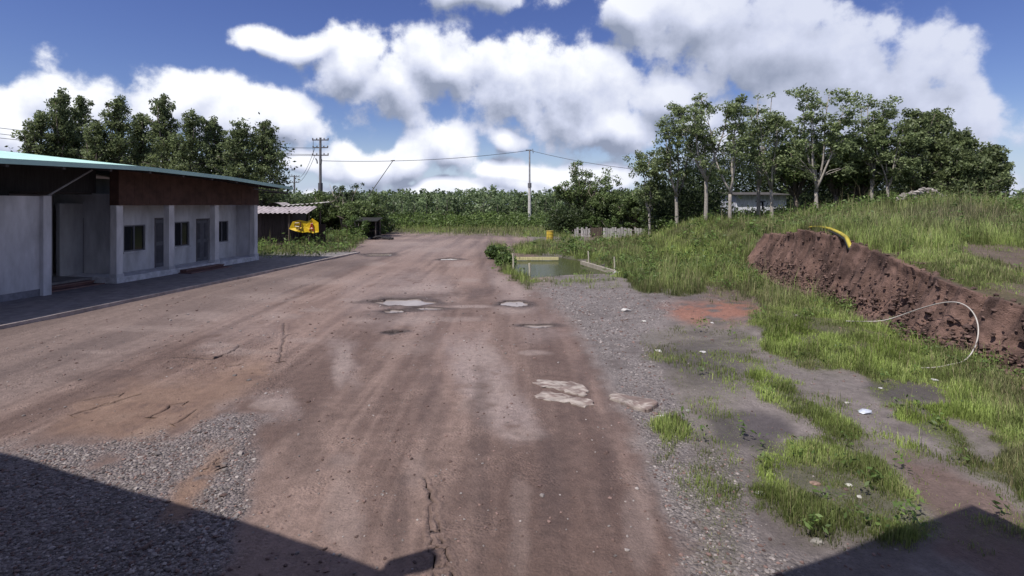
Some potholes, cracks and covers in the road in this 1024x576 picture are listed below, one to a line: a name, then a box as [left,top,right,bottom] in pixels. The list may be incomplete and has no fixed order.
pothole [372,329,414,337]
pothole [492,300,538,309]
crack [273,323,297,363]
crack [418,476,462,576]
crack [69,392,204,427]
pothole [362,297,445,308]
crack [168,345,247,369]
